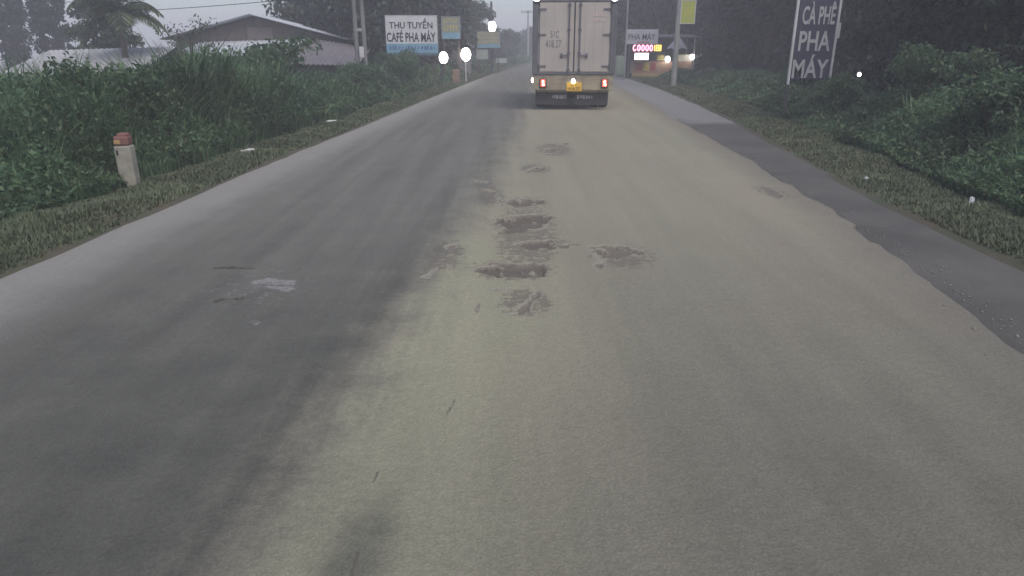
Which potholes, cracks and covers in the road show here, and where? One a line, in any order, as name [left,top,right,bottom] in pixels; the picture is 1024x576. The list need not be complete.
pothole [492,213,555,235]
pothole [505,198,547,207]
pothole [511,239,571,250]
pothole [755,185,786,199]
pothole [470,261,548,278]
pothole [584,244,647,269]
crack [206,266,301,326]
pothole [523,165,547,173]
pothole [507,290,544,316]
